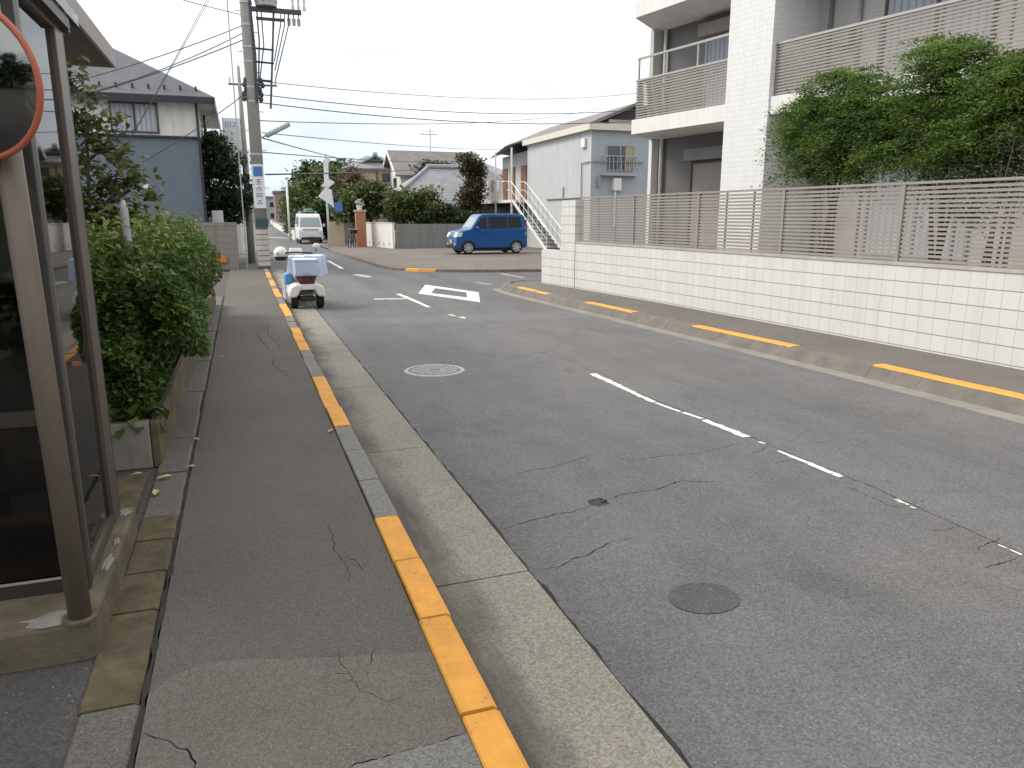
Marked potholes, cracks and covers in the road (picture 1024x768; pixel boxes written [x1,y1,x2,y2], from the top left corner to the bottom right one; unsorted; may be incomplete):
crack [140,733,197,768]
crack [336,645,400,706]
manhole cover [668,582,741,614]
pothole [588,498,609,507]
manhole cover [404,364,465,377]
crack [507,443,794,478]
crack [505,481,716,529]
crack [632,390,1023,568]
crack [548,539,625,569]
